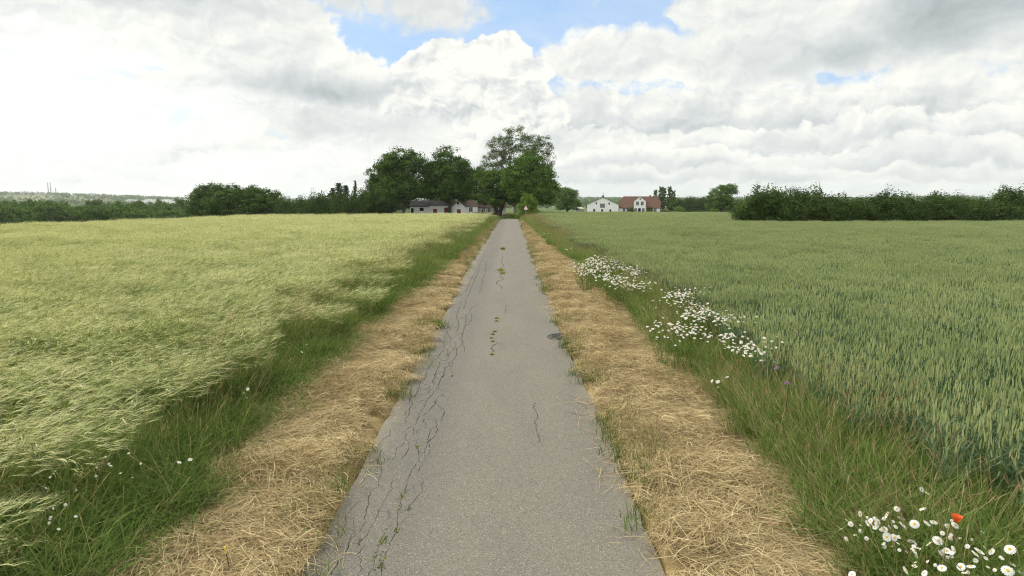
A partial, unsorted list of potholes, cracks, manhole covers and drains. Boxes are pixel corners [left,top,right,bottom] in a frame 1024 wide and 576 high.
crack [330,252,488,576]
manhole cover [547,333,573,342]
